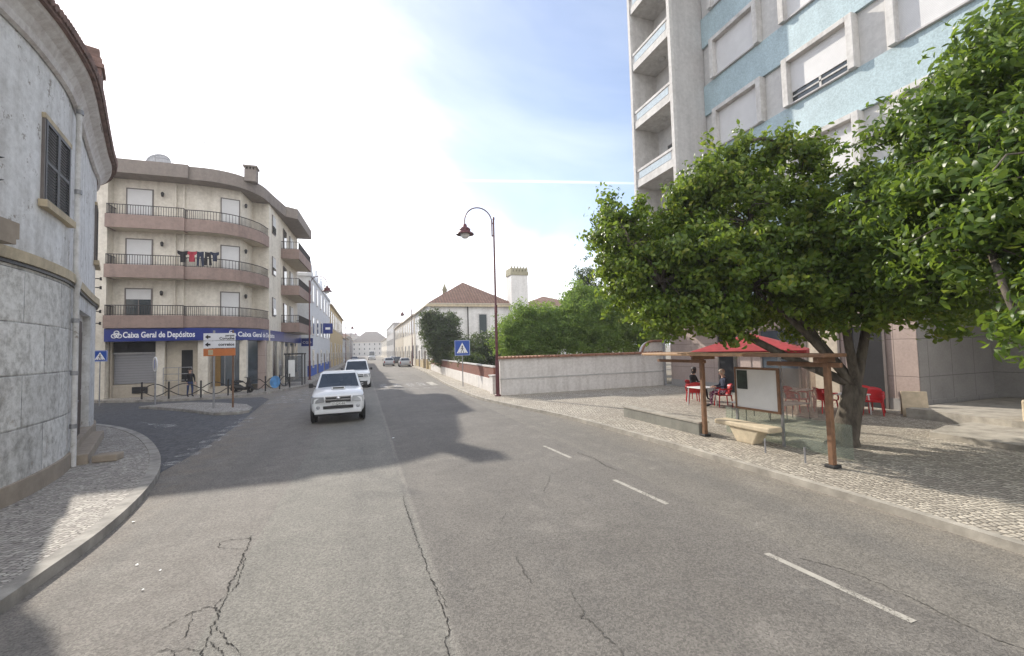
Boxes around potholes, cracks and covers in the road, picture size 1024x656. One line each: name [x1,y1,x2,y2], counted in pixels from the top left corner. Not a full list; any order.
crack [157,536,251,656]
crack [403,498,451,656]
crack [571,591,623,656]
